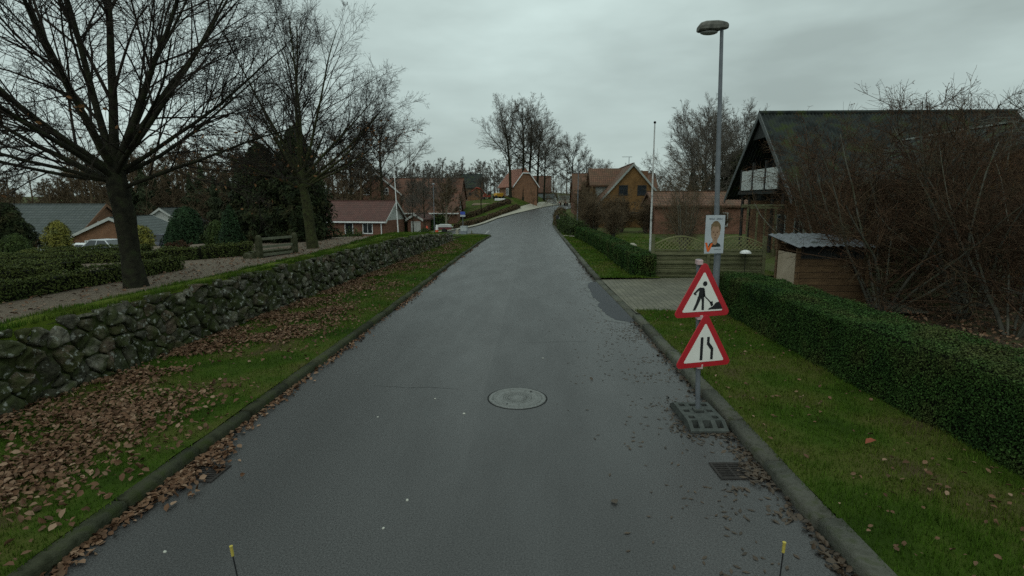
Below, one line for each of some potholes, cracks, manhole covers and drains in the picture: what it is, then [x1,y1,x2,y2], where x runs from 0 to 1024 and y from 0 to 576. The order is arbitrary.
drain grate [187,464,231,483]
manhole cover [487,388,547,409]
drain grate [709,462,755,480]
